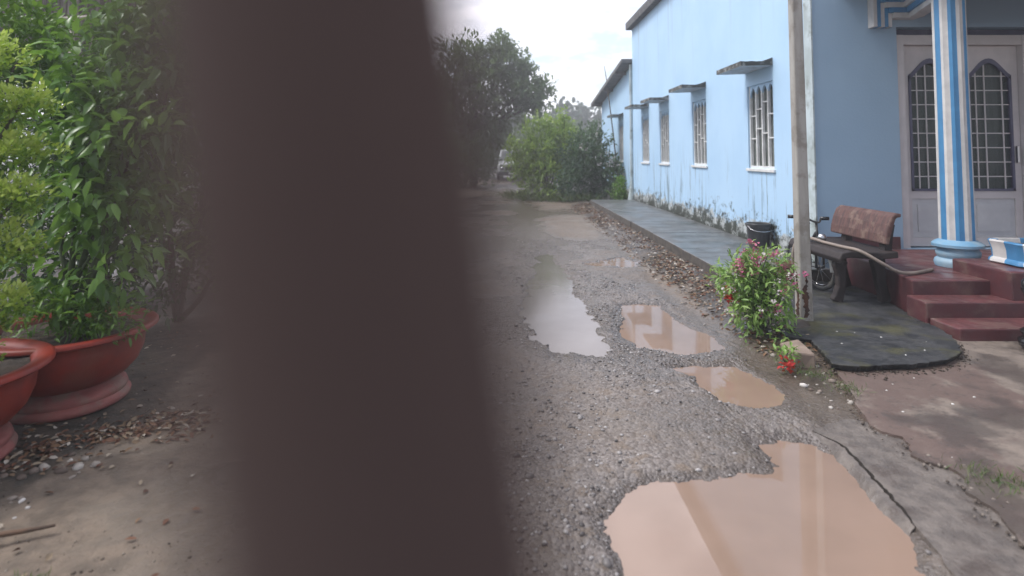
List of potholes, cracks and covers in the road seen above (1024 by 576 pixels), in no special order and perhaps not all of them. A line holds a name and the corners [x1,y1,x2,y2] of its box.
pothole [610,300,736,356]
pothole [575,425,952,576]
pothole [520,251,639,360]
pothole [658,356,802,413]
crack [813,431,916,532]
